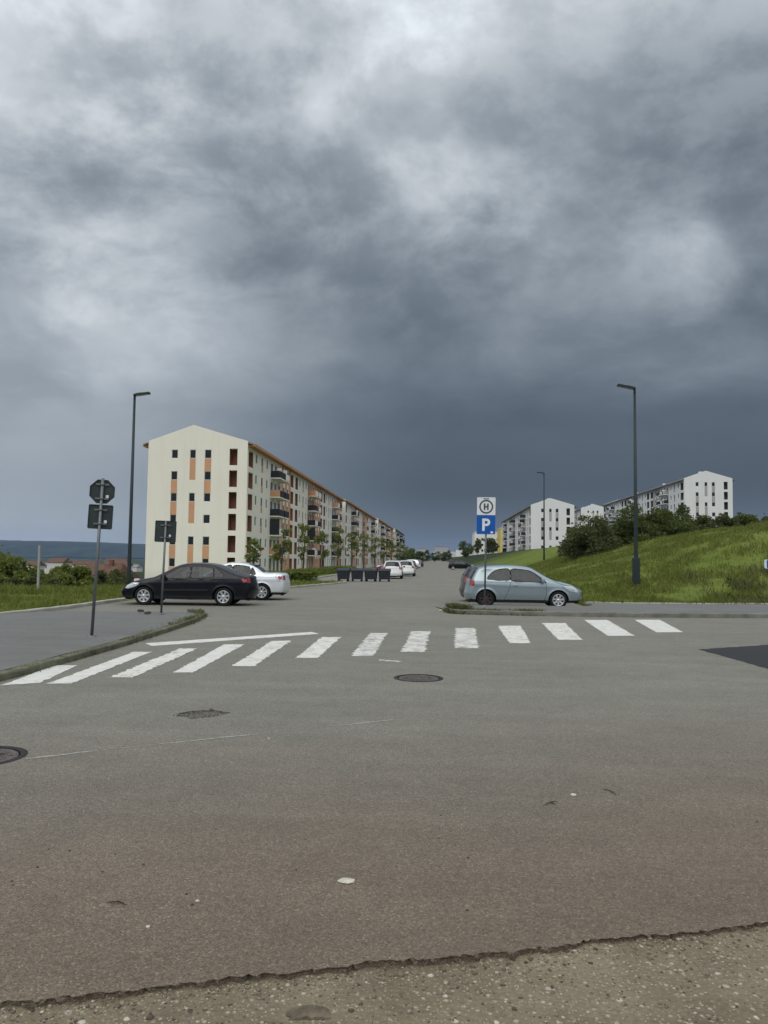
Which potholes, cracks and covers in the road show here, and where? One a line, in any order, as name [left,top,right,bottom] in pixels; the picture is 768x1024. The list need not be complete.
pothole [173,708,230,719]
manhole cover [0,746,28,764]
manhole cover [394,674,444,682]
